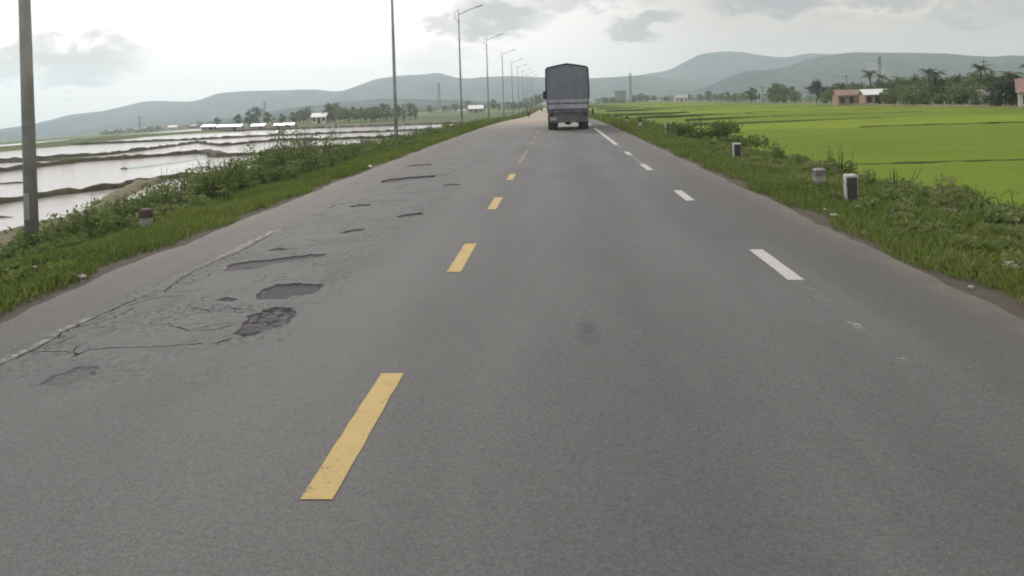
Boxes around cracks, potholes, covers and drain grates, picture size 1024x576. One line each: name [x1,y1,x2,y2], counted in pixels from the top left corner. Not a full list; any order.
crack [0,234,272,366]
pothole [256,283,325,300]
pothole [233,307,297,337]
pothole [223,254,327,271]
pothole [381,175,436,183]
